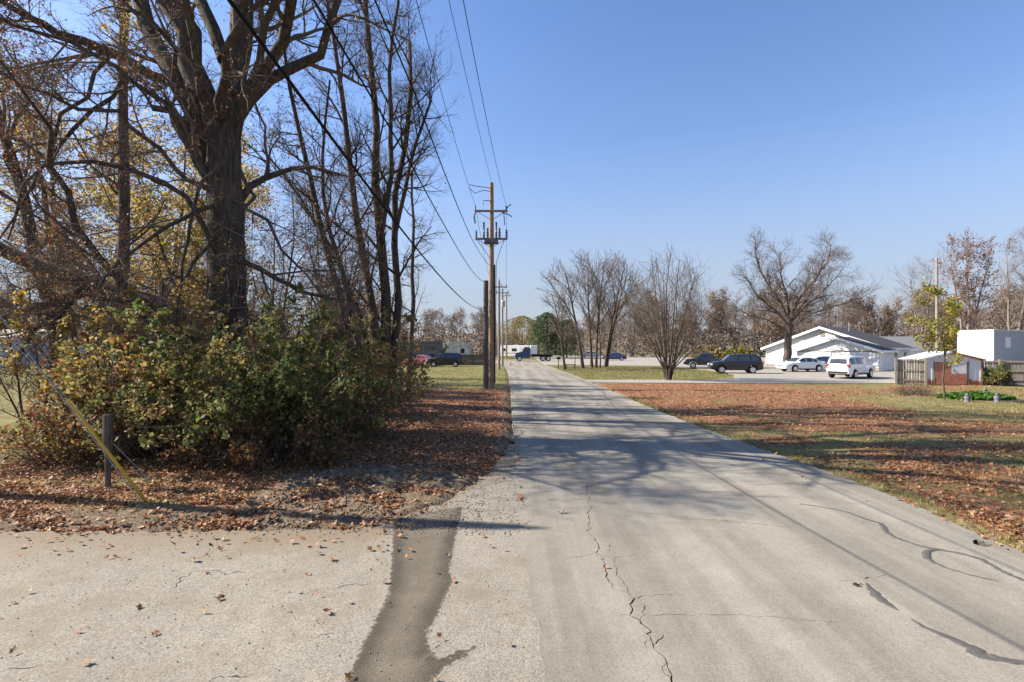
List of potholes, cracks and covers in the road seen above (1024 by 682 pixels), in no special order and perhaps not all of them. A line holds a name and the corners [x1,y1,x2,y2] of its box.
crack [575,486,840,682]
